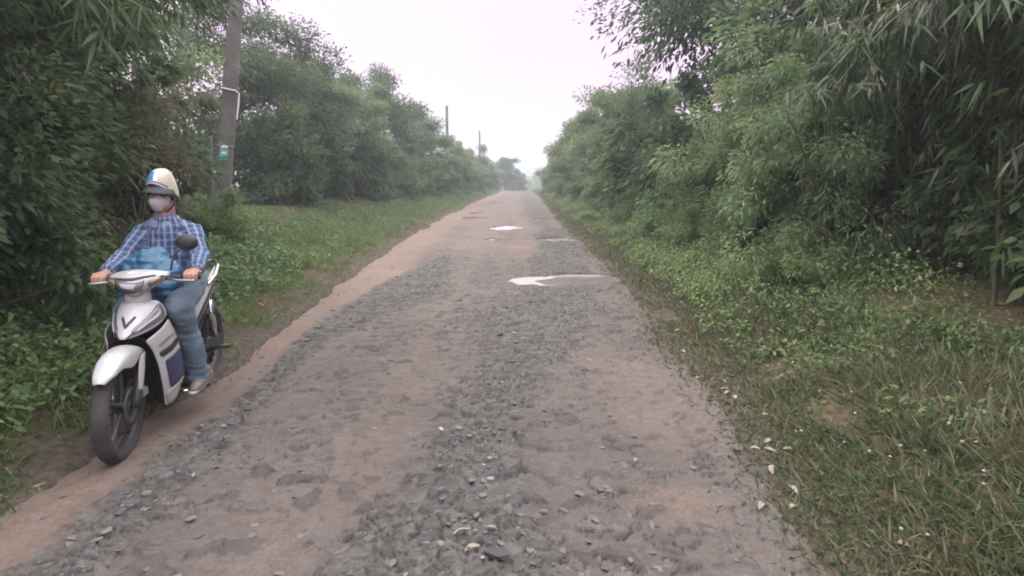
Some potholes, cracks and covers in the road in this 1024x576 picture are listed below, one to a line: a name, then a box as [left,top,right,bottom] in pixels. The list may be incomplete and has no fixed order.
pothole [499,271,628,288]
